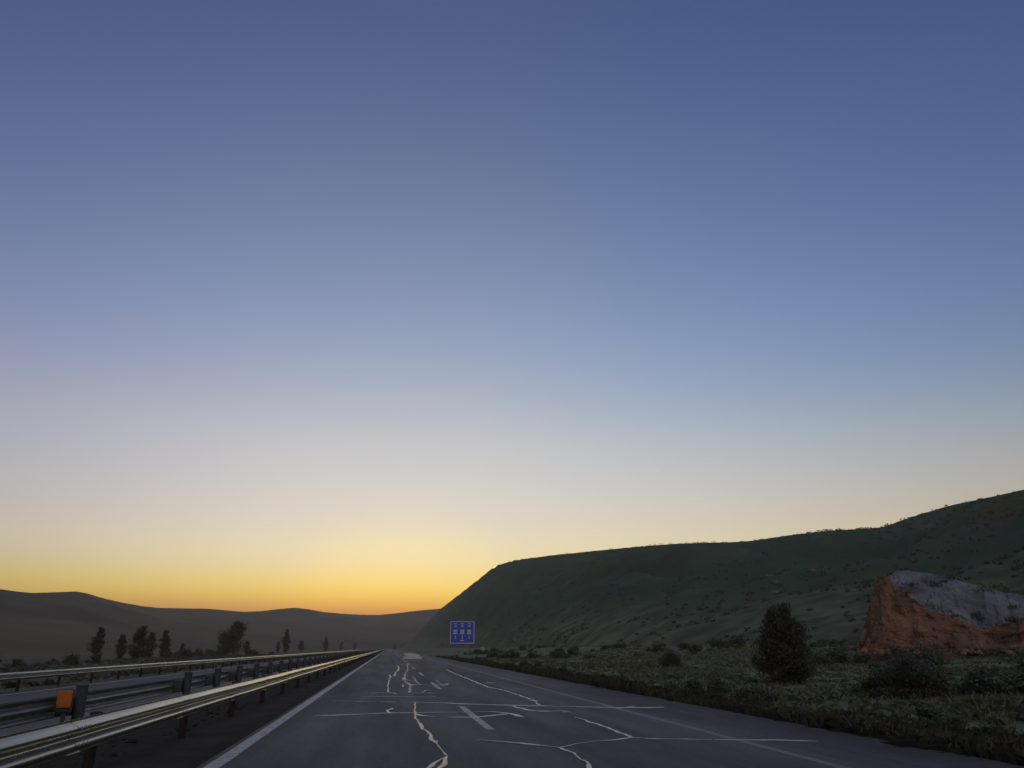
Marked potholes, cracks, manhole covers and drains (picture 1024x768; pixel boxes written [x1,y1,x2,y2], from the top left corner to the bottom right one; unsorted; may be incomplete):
crack [360,678,433,697]
